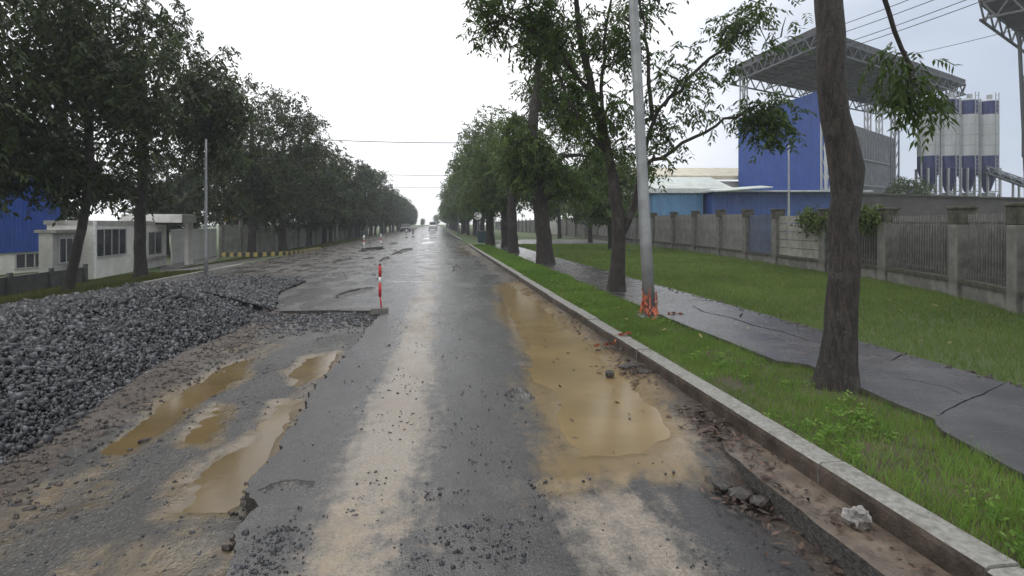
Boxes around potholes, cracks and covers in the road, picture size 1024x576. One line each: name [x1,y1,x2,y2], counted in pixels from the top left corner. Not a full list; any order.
crack [693,300,809,341]
pothole [257,479,315,495]
pothole [503,387,535,404]
